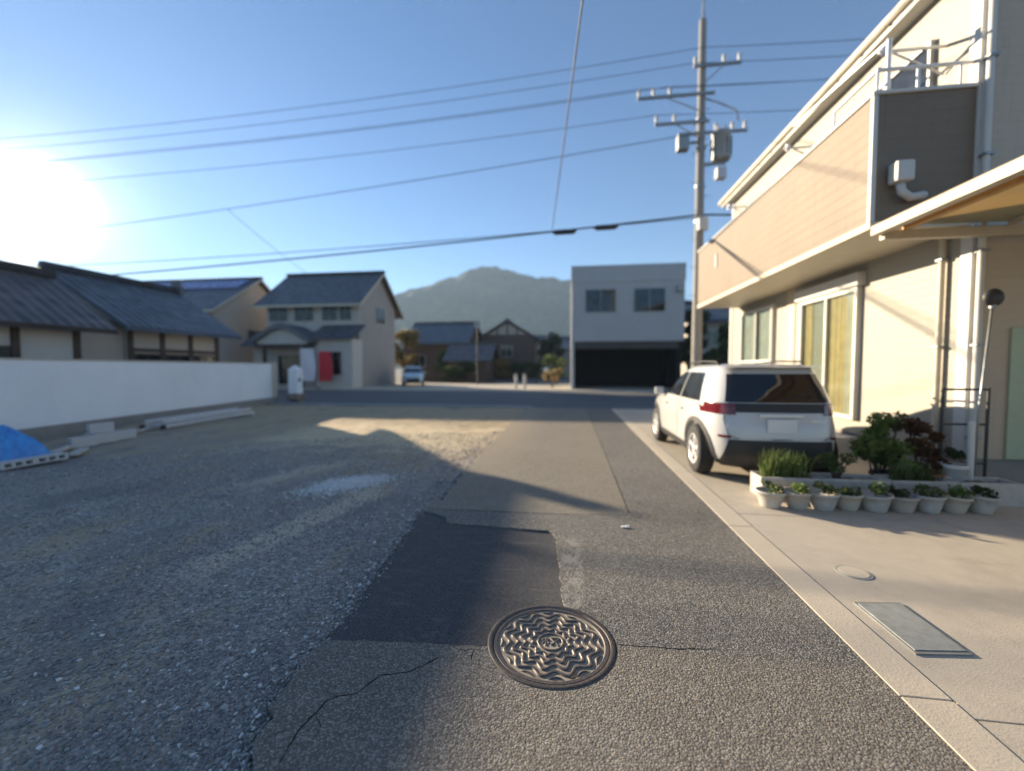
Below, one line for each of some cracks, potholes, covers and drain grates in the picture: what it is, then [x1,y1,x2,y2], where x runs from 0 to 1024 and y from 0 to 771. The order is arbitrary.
manhole cover [488,605,616,691]
utility cover [835,565,873,580]
crack [622,645,732,663]
crack [273,653,439,768]
